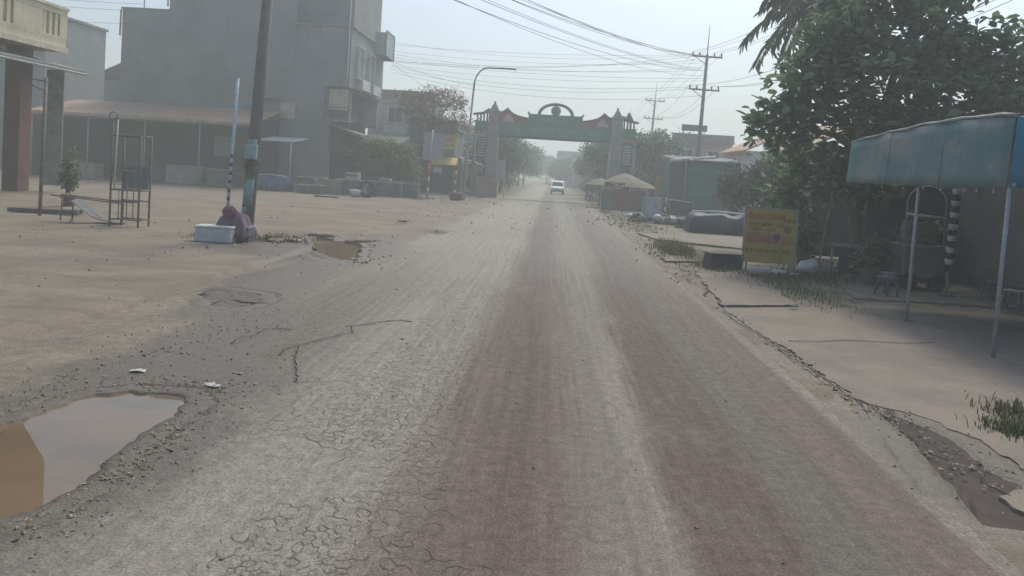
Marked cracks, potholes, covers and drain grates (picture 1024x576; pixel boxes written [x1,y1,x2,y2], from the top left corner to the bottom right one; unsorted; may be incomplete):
pothole [853,405,1024,544]
crack [190,260,505,576]
pothole [179,287,280,312]
pothole [302,236,373,262]
pothole [0,384,217,533]
